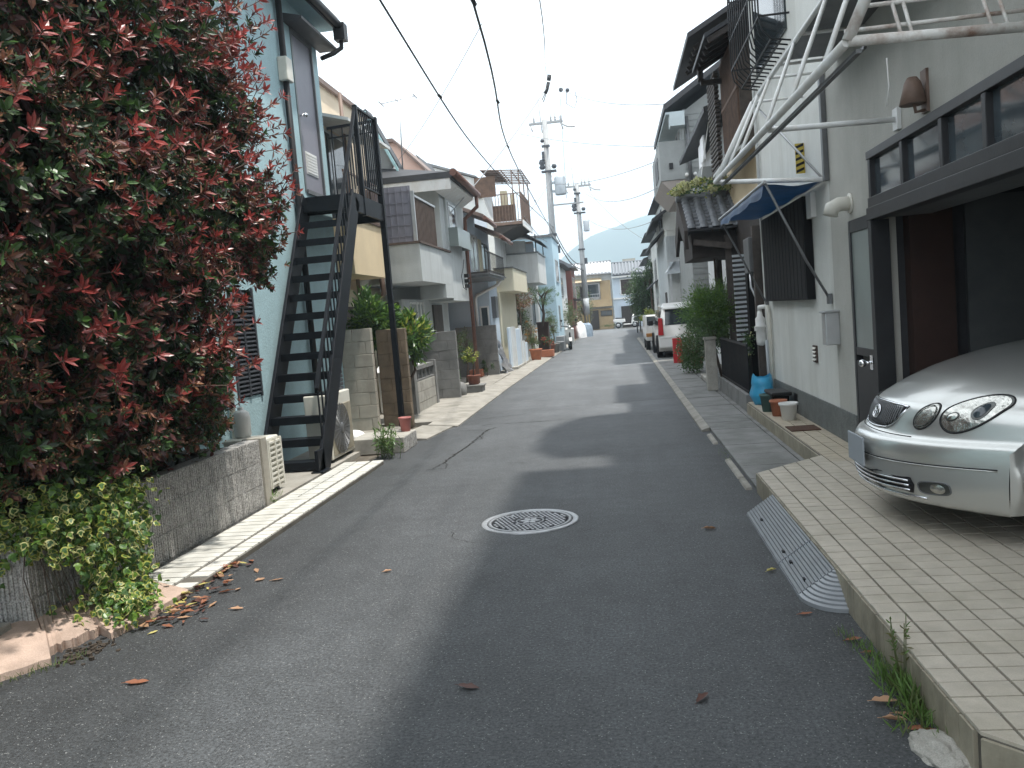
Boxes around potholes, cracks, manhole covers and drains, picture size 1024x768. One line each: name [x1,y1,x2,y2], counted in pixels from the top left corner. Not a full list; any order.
crack [429,398,674,470]
manhole cover [481,509,579,535]
